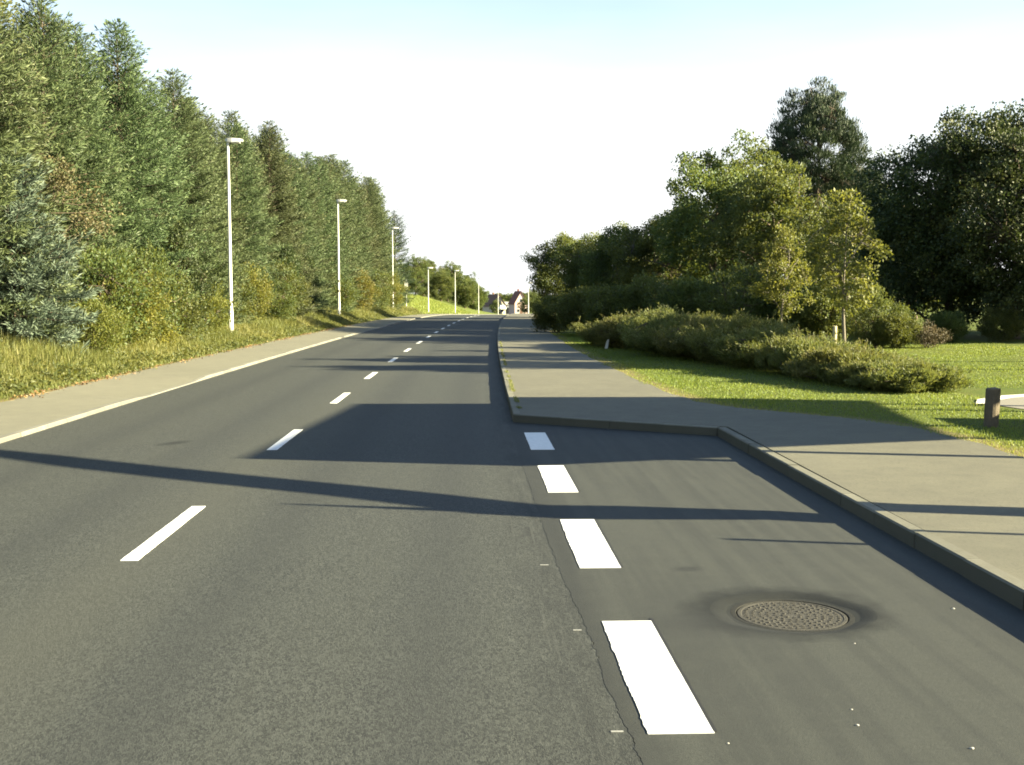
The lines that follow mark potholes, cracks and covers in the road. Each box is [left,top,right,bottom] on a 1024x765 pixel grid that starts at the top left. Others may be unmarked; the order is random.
manhole cover [730,599,855,632]
